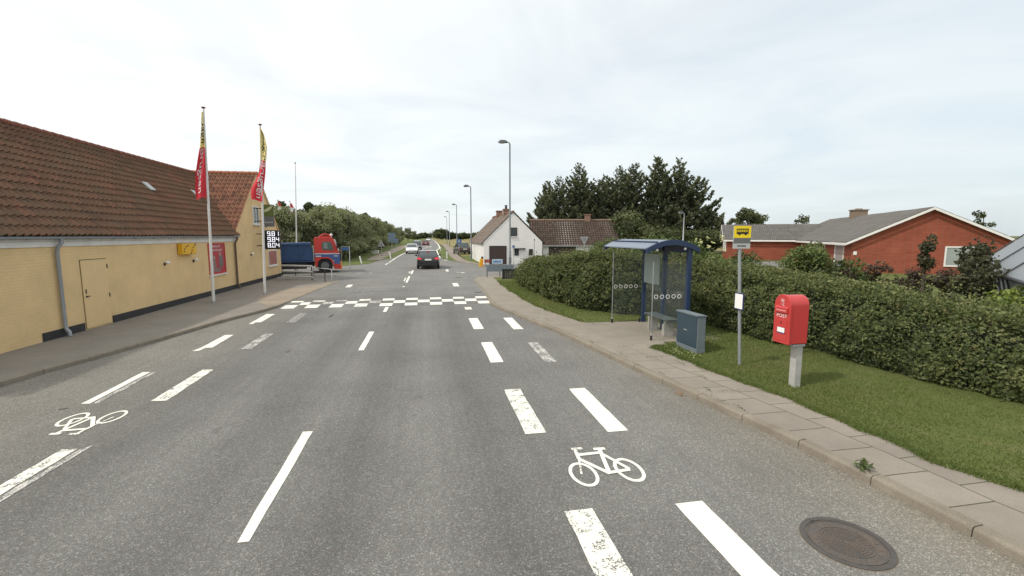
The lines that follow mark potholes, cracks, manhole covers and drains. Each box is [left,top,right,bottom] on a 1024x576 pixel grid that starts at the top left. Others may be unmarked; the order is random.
manhole cover [799,517,899,572]
